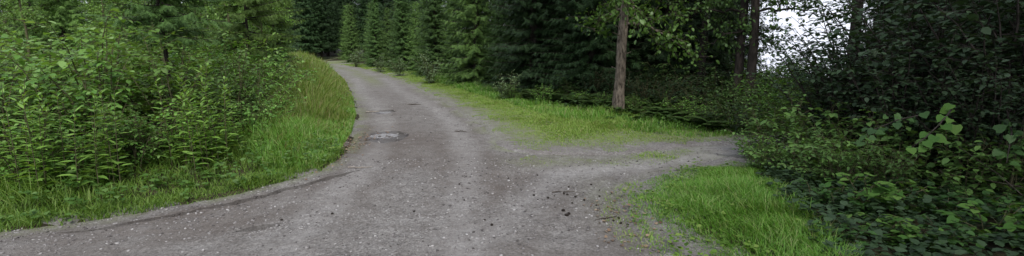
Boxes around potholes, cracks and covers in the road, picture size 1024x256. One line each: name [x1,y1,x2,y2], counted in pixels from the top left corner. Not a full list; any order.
pothole [363,131,409,143]
